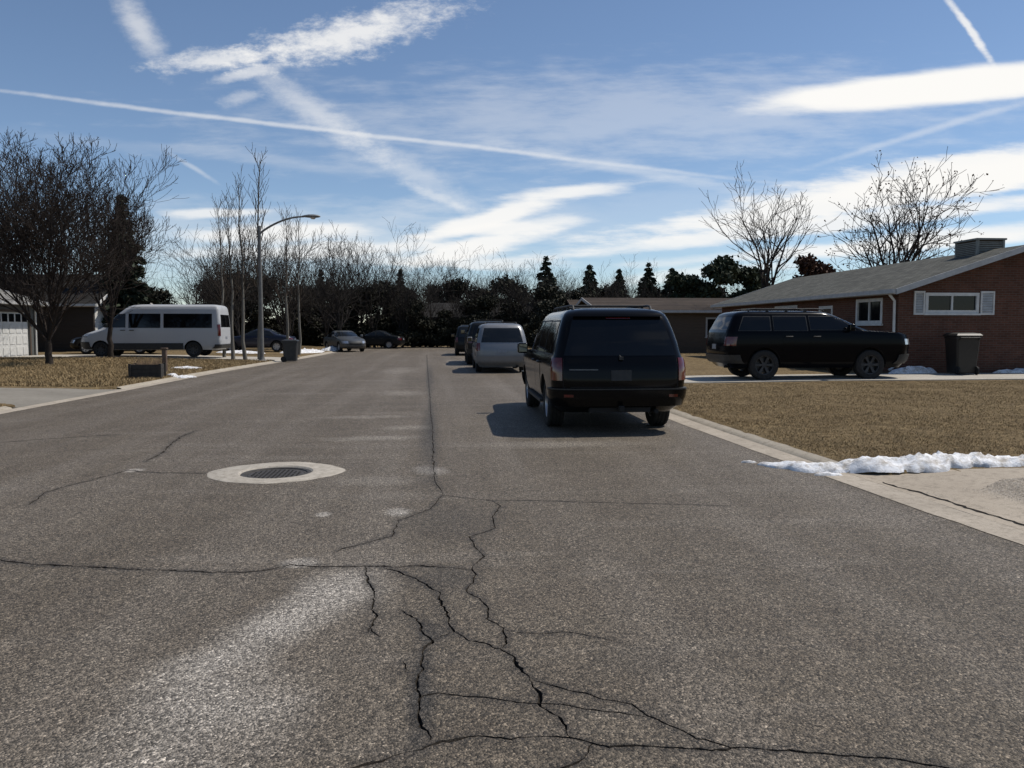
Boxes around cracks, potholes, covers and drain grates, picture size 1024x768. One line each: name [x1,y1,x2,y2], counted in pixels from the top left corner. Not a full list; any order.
manhole cover [207,462,346,484]
crack [335,495,715,552]
crack [30,431,194,504]
crack [1,504,948,768]
